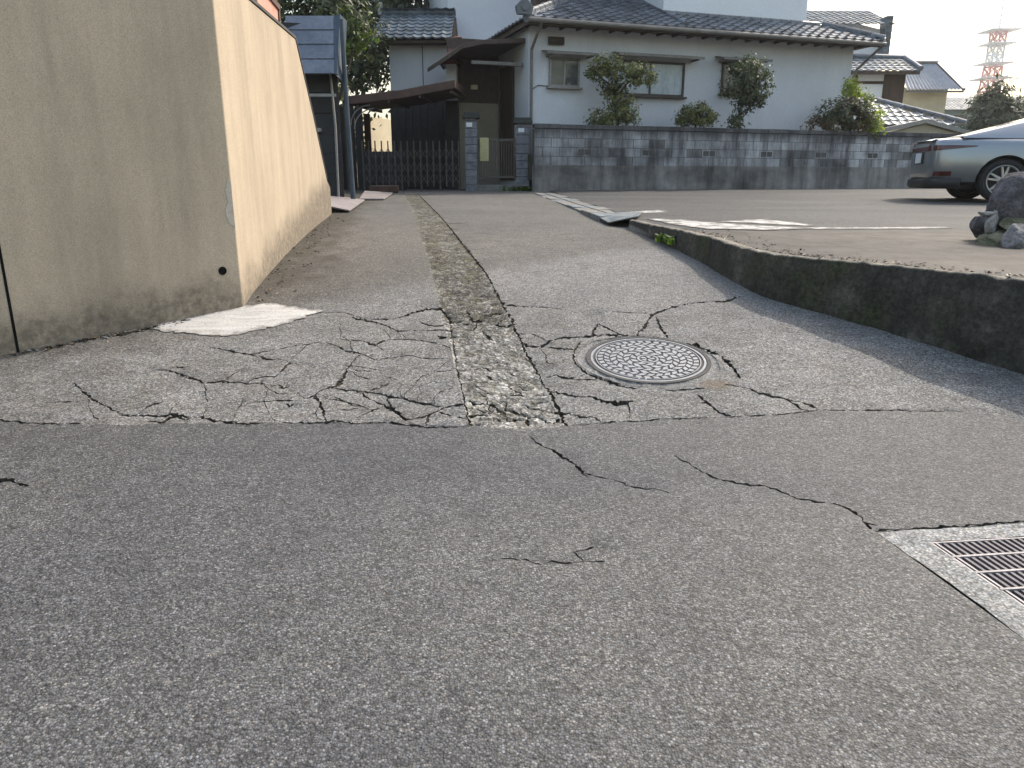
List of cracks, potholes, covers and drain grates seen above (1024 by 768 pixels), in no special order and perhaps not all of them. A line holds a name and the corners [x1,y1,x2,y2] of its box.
crack [0,344,314,425]
manhole cover [577,336,720,387]
crack [291,195,818,493]
crack [0,477,30,487]
drain grate [877,523,1024,639]
crack [500,547,604,565]
crack [674,455,1024,532]
